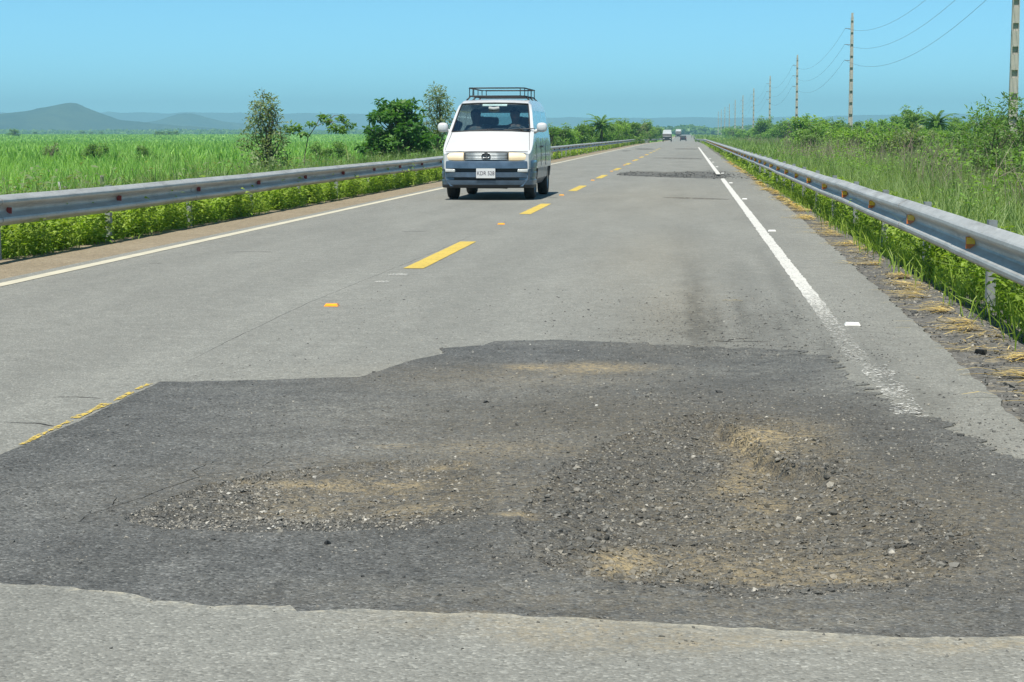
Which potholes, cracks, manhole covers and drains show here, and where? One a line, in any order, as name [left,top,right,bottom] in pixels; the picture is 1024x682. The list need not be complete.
pothole [512,412,995,599]
pothole [124,459,496,533]
crack [207,243,455,352]
